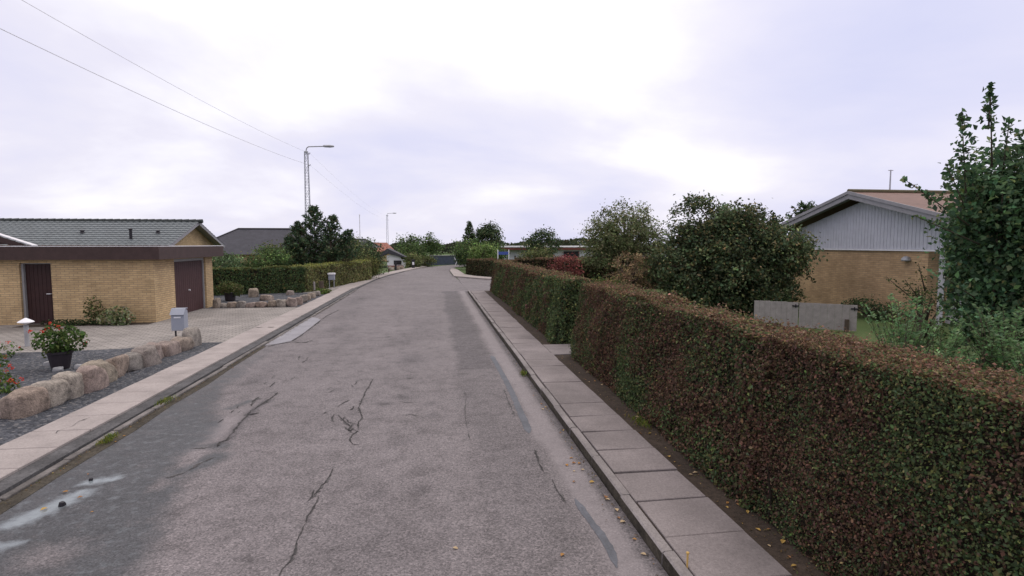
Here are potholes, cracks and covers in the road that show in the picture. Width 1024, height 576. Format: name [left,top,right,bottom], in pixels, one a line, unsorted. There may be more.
crack [323,379,383,445]
crack [279,469,333,576]
crack [166,446,212,478]
crack [534,449,565,502]
